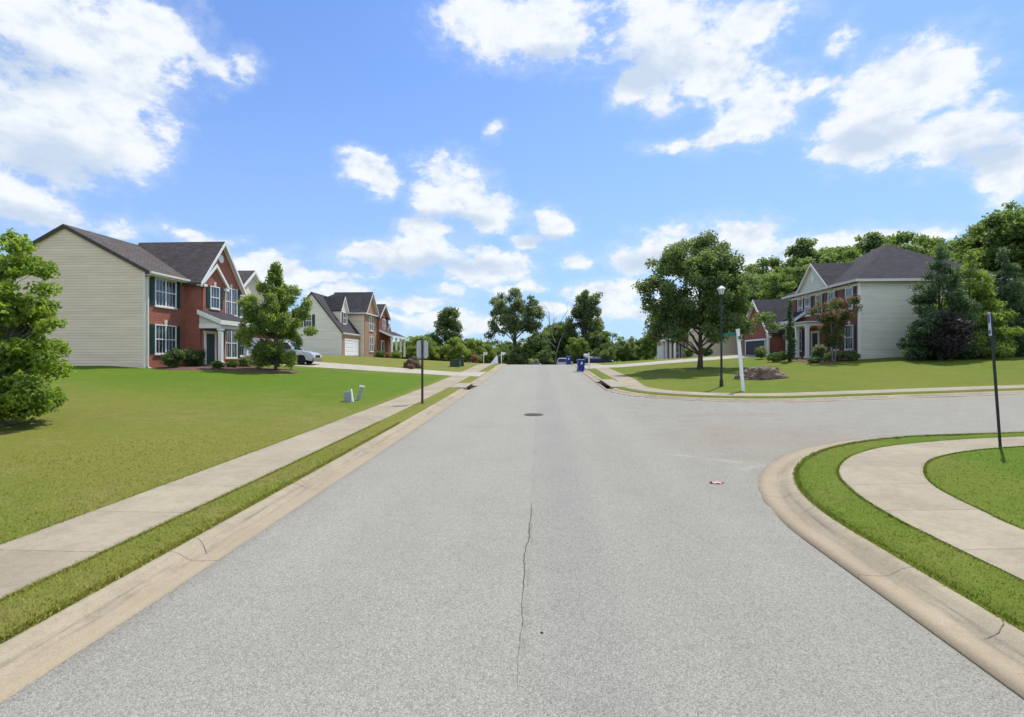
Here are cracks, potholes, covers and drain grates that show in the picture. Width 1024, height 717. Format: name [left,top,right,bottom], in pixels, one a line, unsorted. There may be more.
drain grate [595,379,627,390]
crack [517,503,532,689]
